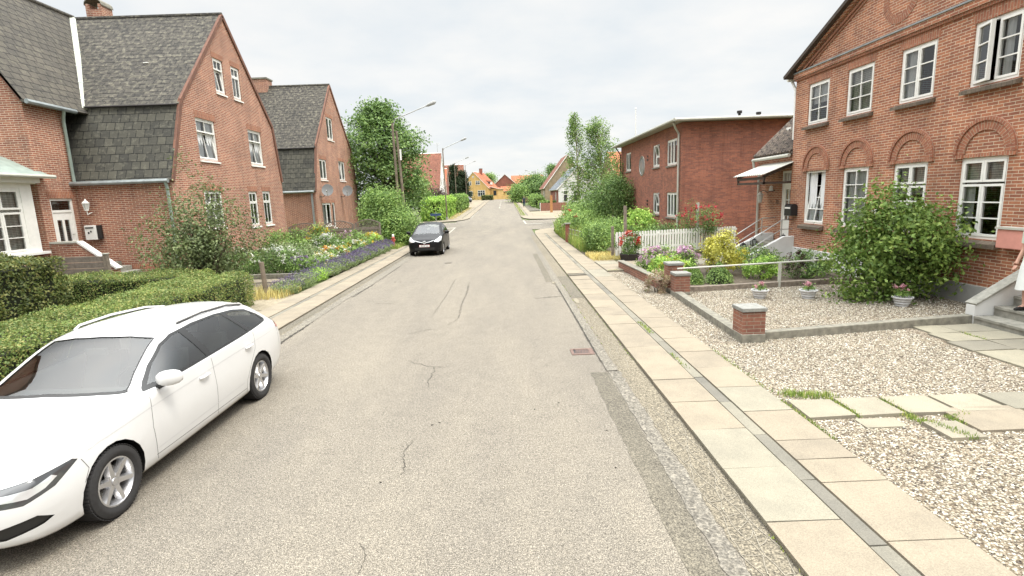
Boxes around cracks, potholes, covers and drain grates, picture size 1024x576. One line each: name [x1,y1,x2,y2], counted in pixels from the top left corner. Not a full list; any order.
crack [408,281,469,334]
